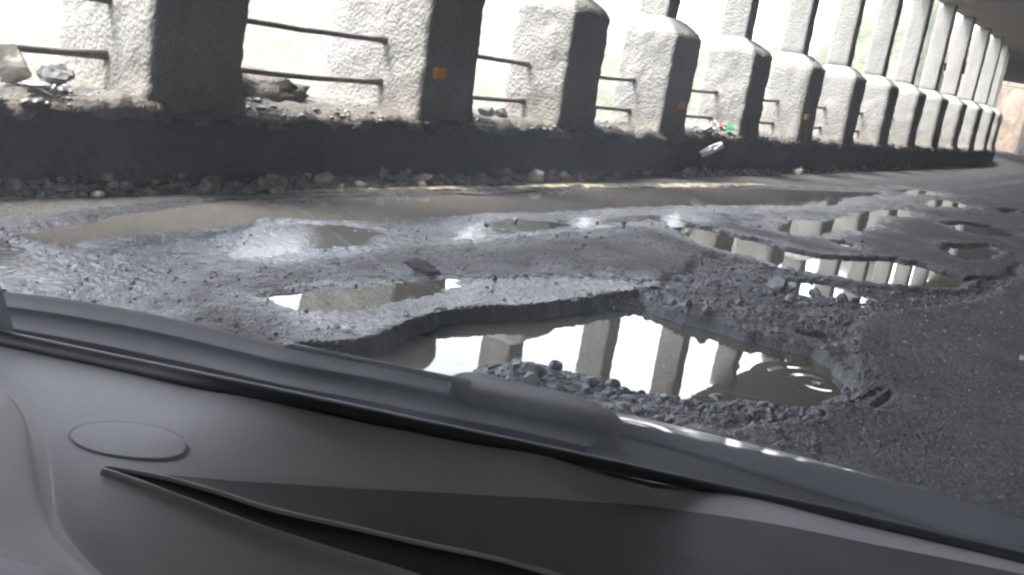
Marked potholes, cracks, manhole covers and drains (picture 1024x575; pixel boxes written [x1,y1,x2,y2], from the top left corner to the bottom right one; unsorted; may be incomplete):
pothole [785,276,876,308]
pothole [295,289,855,416]
pothole [937,242,1009,261]
pothole [660,219,979,295]
pothole [936,220,1024,238]
